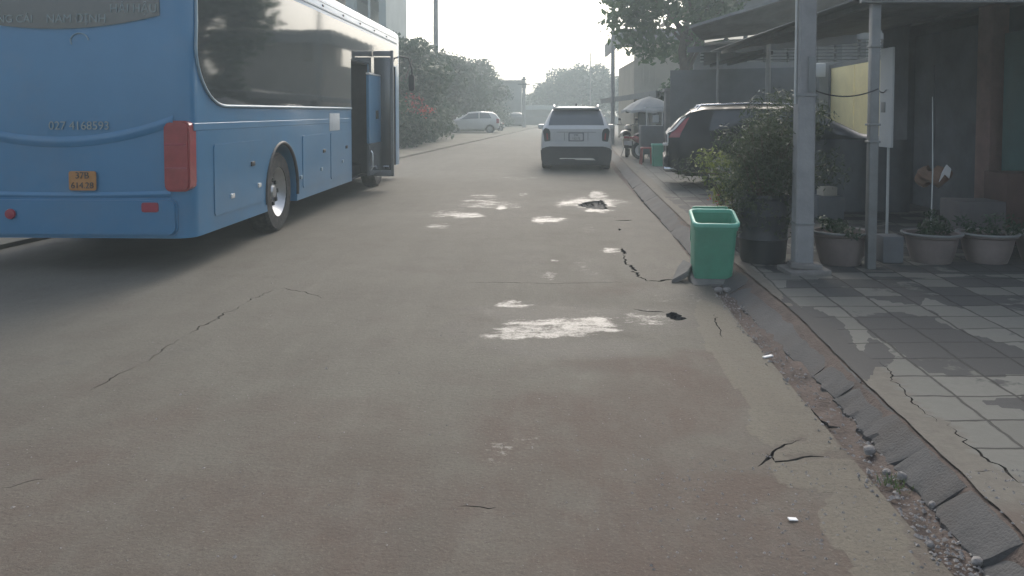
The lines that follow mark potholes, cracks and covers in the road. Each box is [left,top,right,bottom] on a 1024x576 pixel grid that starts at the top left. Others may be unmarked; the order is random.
crack [91,289,312,390]
crack [880,363,1020,483]
pothole [578,200,607,210]
pothole [666,312,687,320]
crack [759,409,840,466]
crack [623,255,672,282]
